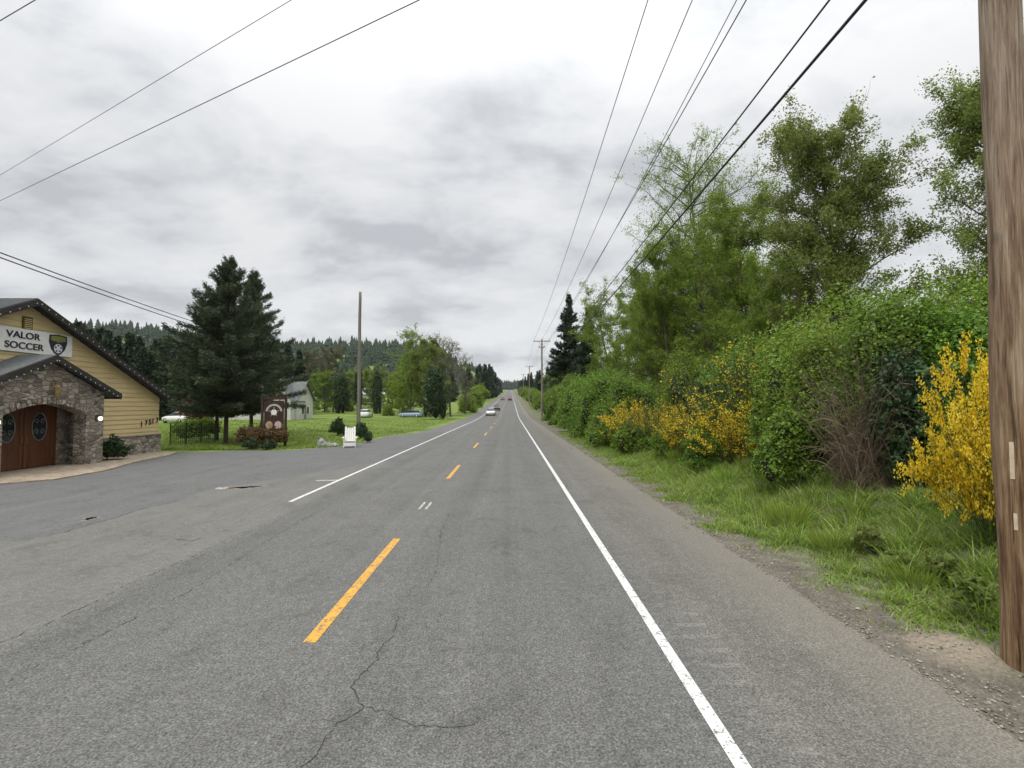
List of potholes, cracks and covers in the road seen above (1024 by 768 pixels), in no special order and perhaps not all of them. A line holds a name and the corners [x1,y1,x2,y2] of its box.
crack [7,505,329,682]
crack [301,617,472,767]
